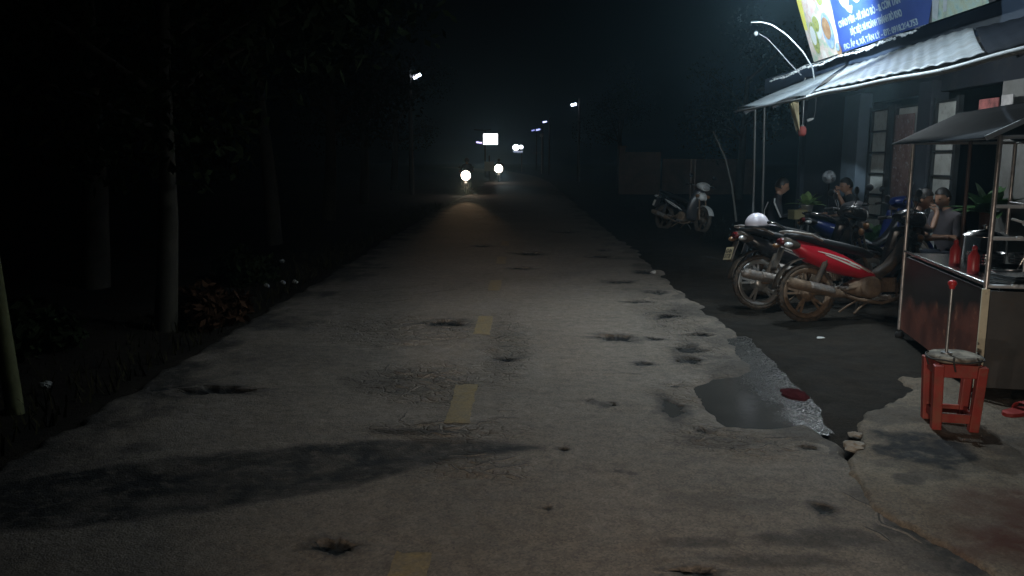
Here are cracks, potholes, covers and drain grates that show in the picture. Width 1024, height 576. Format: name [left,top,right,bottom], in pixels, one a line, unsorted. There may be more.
pothole [666,354,710,366]
pothole [162,383,269,397]
pothole [576,397,613,407]
pothole [684,424,724,437]
pothole [624,360,662,368]
pothole [794,497,852,522]
pothole [587,399,627,411]
pothole [648,393,696,422]
pothole [417,318,472,327]
crack [841,492,924,544]
pothole [586,332,652,343]
pothole [666,342,714,355]
